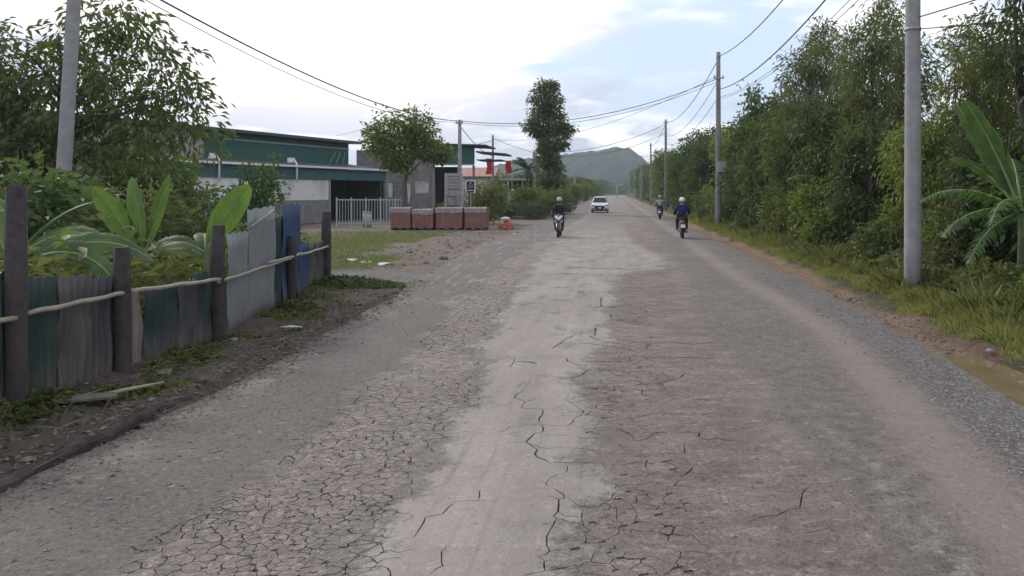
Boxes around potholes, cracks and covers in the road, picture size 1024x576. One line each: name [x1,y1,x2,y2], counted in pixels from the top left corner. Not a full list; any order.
crack [97,266,538,576]
crack [500,281,737,576]
crack [743,475,812,524]
